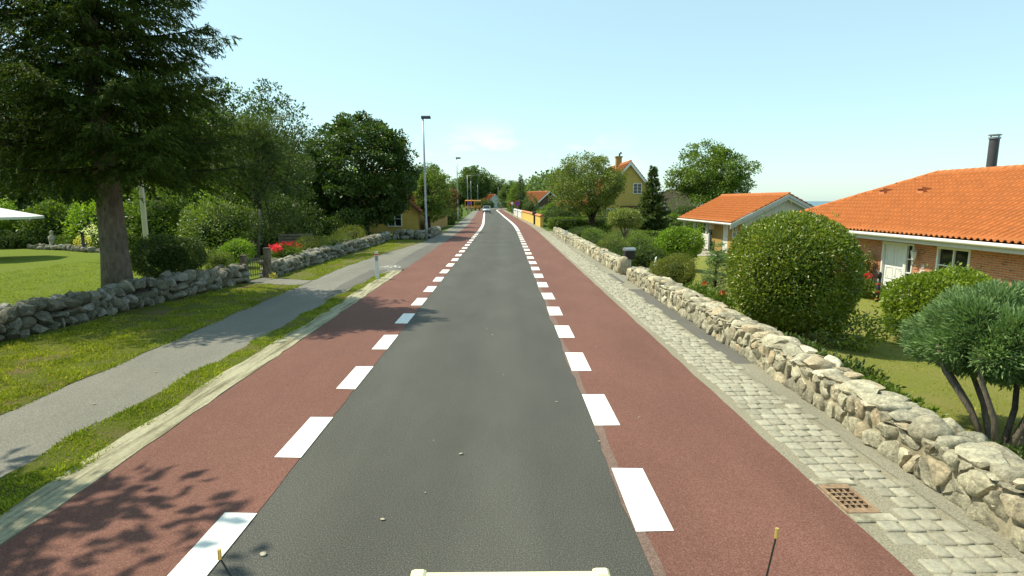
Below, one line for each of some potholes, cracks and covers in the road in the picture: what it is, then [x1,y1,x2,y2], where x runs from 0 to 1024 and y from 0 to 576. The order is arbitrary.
drain grate [817,484,882,514]
